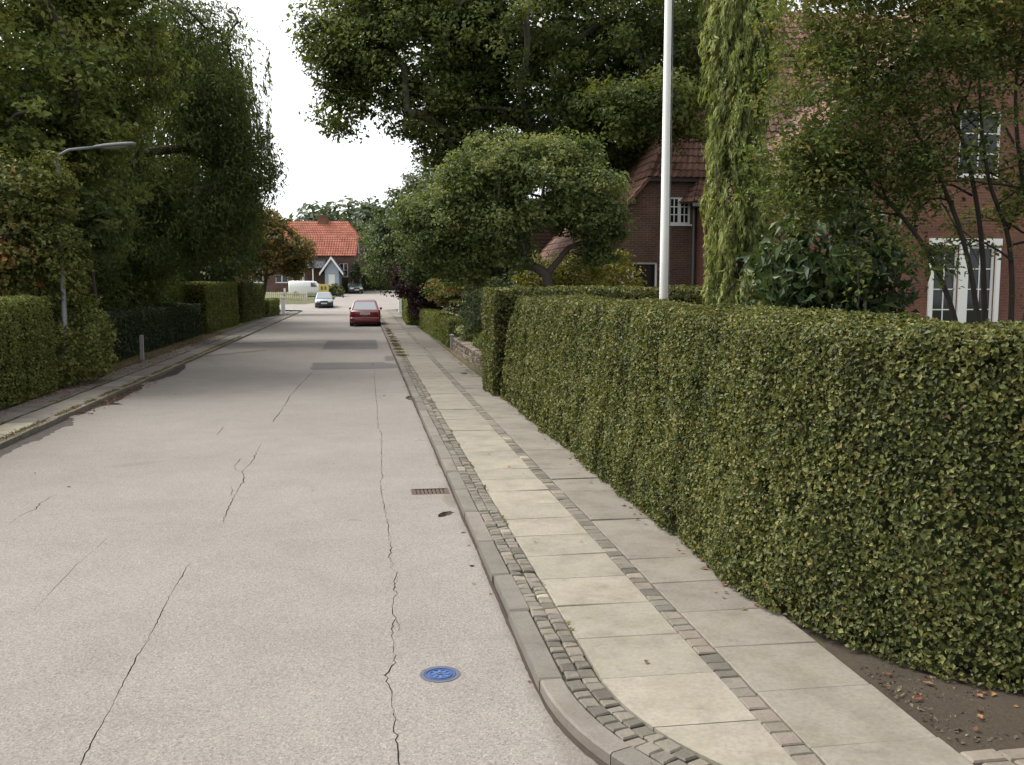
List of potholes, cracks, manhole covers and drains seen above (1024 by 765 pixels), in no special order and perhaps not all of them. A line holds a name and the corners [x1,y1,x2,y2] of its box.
manhole cover [420,666,460,683]
crack [374,376,400,765]
crack [223,444,261,524]
